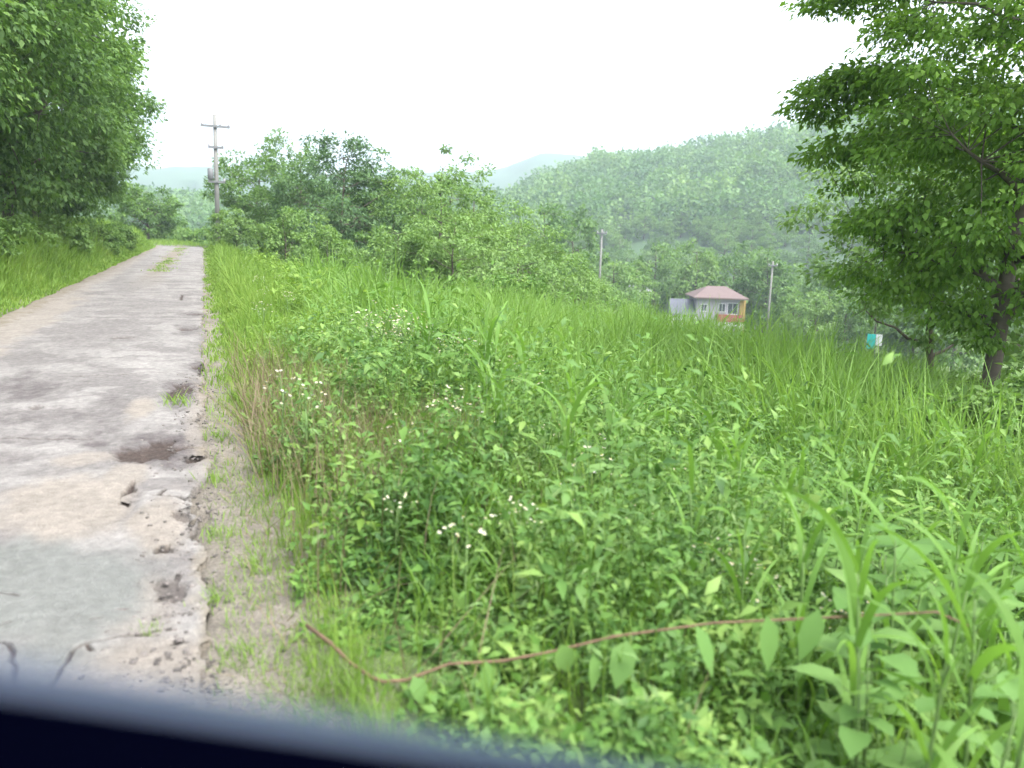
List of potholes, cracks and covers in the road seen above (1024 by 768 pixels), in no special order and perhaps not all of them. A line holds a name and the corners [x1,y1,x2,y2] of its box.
pothole [141,632,211,653]
pothole [156,503,196,536]
pothole [95,436,206,465]
pothole [180,362,205,373]
crack [0,586,183,671]
pothole [136,560,208,617]
pothole [155,378,205,407]
